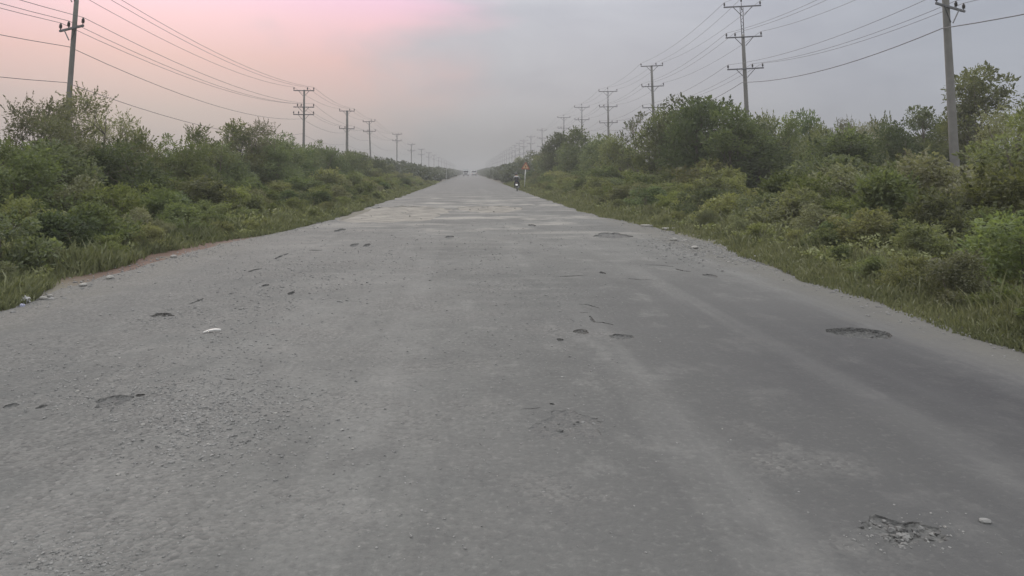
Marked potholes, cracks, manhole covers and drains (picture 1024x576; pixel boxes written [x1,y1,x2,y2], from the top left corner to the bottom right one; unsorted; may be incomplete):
pothole [95,395,134,408]
pothole [857,514,949,547]
pothole [826,327,893,339]
crack [582,304,613,325]
pothole [528,409,605,440]
